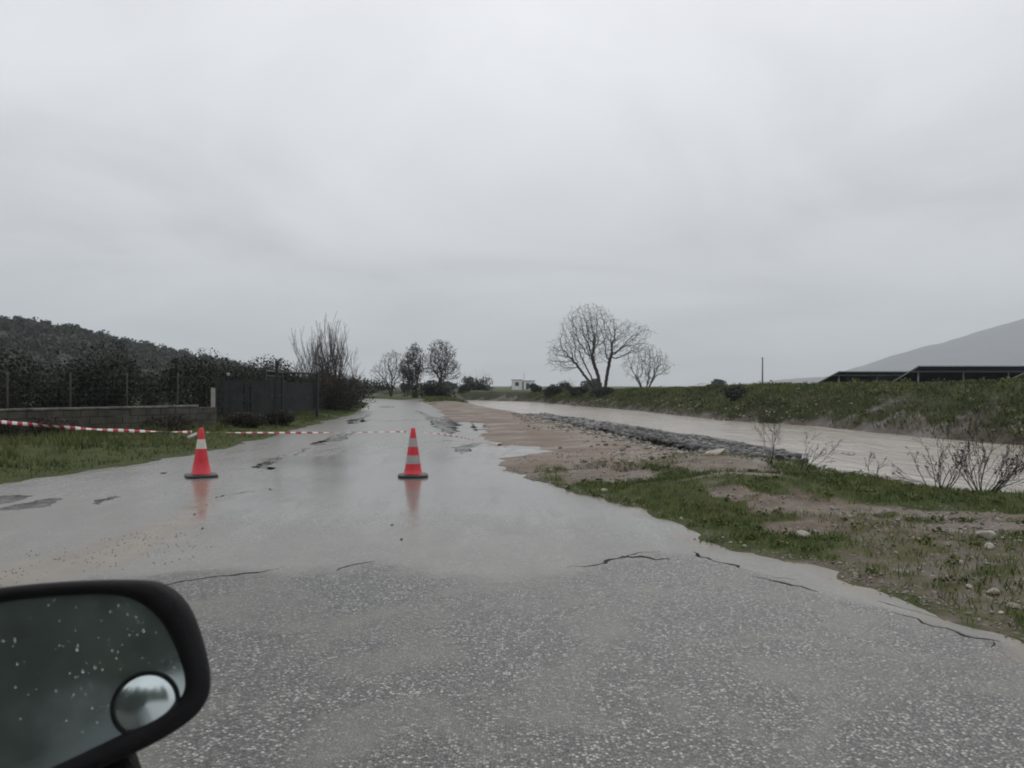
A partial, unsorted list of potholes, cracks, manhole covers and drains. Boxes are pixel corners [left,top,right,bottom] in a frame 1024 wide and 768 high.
pothole [309,431,360,446]
pothole [0,498,62,511]
crack [880,601,1001,648]
crack [694,552,818,592]
pothole [449,443,483,453]
crack [166,568,278,585]
pothole [252,454,287,470]
crack [570,551,669,567]
